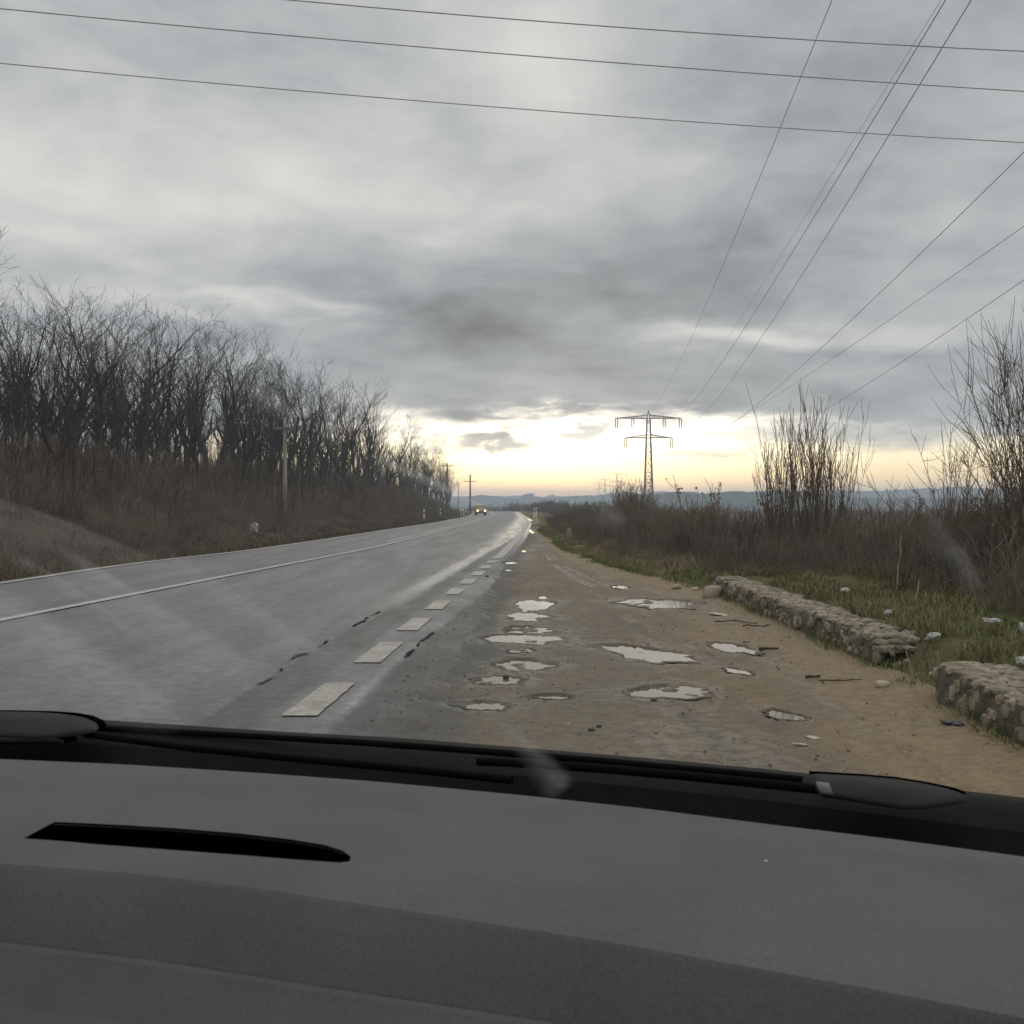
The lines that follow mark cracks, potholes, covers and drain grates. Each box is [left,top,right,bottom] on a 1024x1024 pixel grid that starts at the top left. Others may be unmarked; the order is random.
pothole [489,657,564,672]
pothole [448,699,515,711]
pothole [704,641,766,656]
pothole [505,612,561,622]
pothole [622,683,712,701]
pothole [721,666,756,676]
pothole [586,642,701,665]
pothole [467,674,529,686]
pothole [513,600,559,613]
crack [352,611,381,627]
pothole [762,707,812,722]
crack [405,632,434,658]
